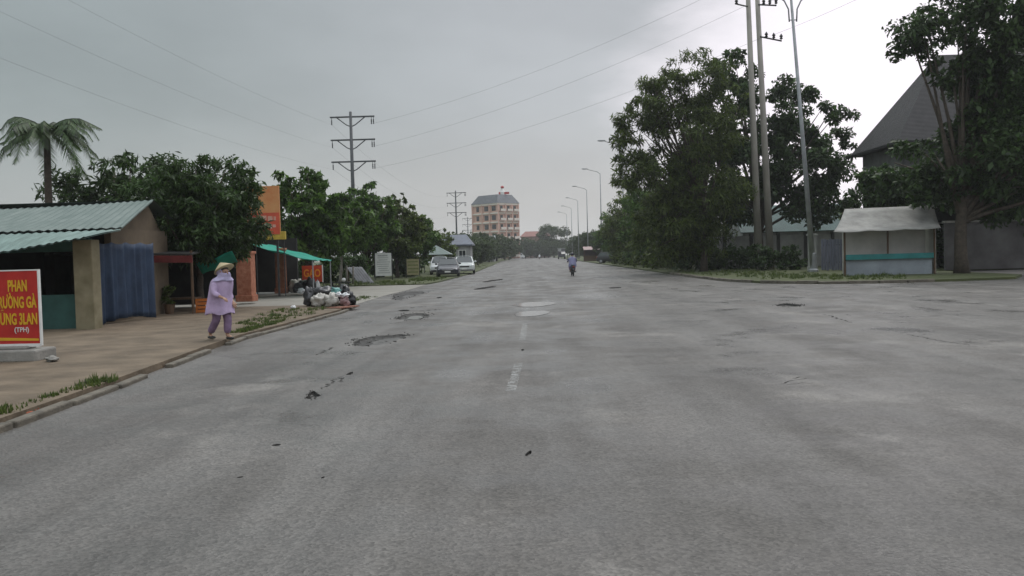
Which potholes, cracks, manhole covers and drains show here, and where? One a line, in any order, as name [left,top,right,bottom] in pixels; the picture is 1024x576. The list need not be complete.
pothole [393,291,429,300]
pothole [390,312,434,321]
pothole [345,332,414,346]
